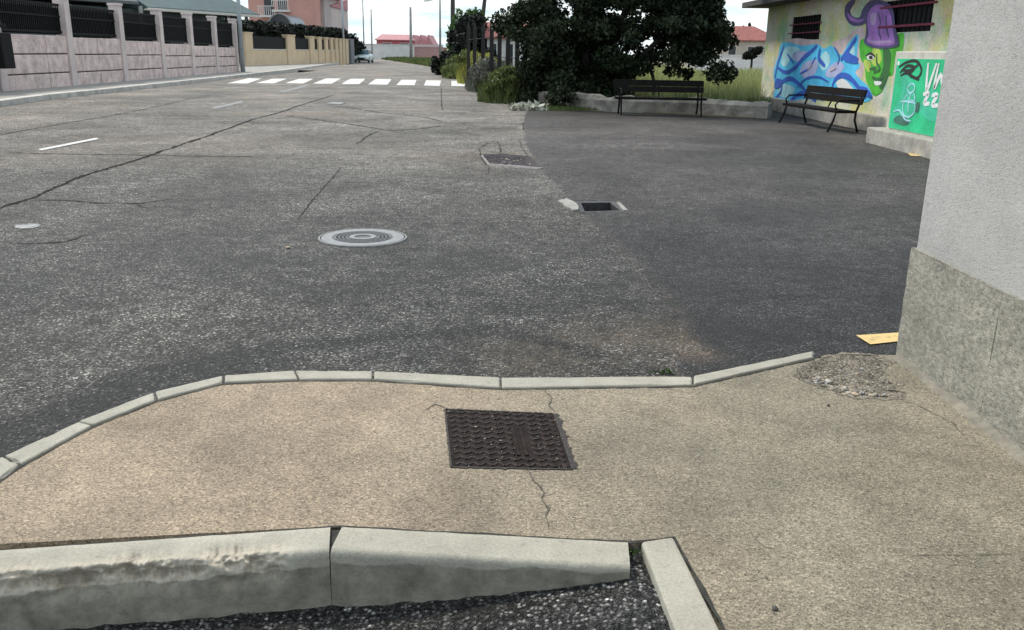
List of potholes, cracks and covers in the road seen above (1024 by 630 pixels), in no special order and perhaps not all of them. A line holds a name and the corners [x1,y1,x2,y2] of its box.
manhole cover [318,228,407,248]
manhole cover [444,408,578,470]
crack [0,89,444,208]
crack [528,469,557,531]
pothole [793,352,906,401]
crack [12,229,106,244]
